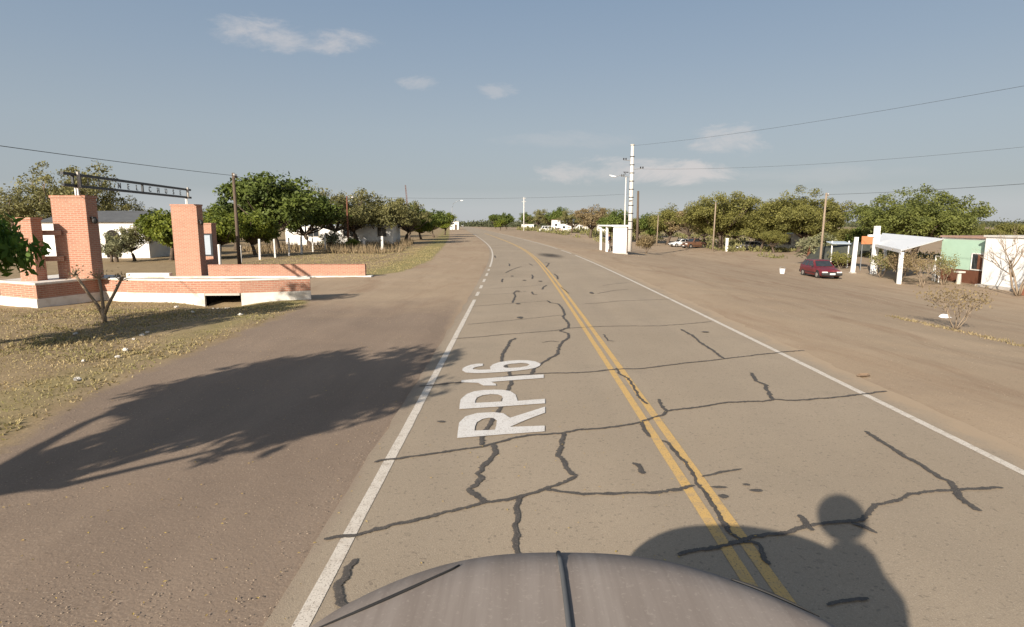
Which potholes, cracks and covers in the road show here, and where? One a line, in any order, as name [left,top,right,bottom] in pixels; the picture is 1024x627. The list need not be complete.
crack [333,559,357,607]
crack [826,597,869,605]
crack [324,255,1003,565]
